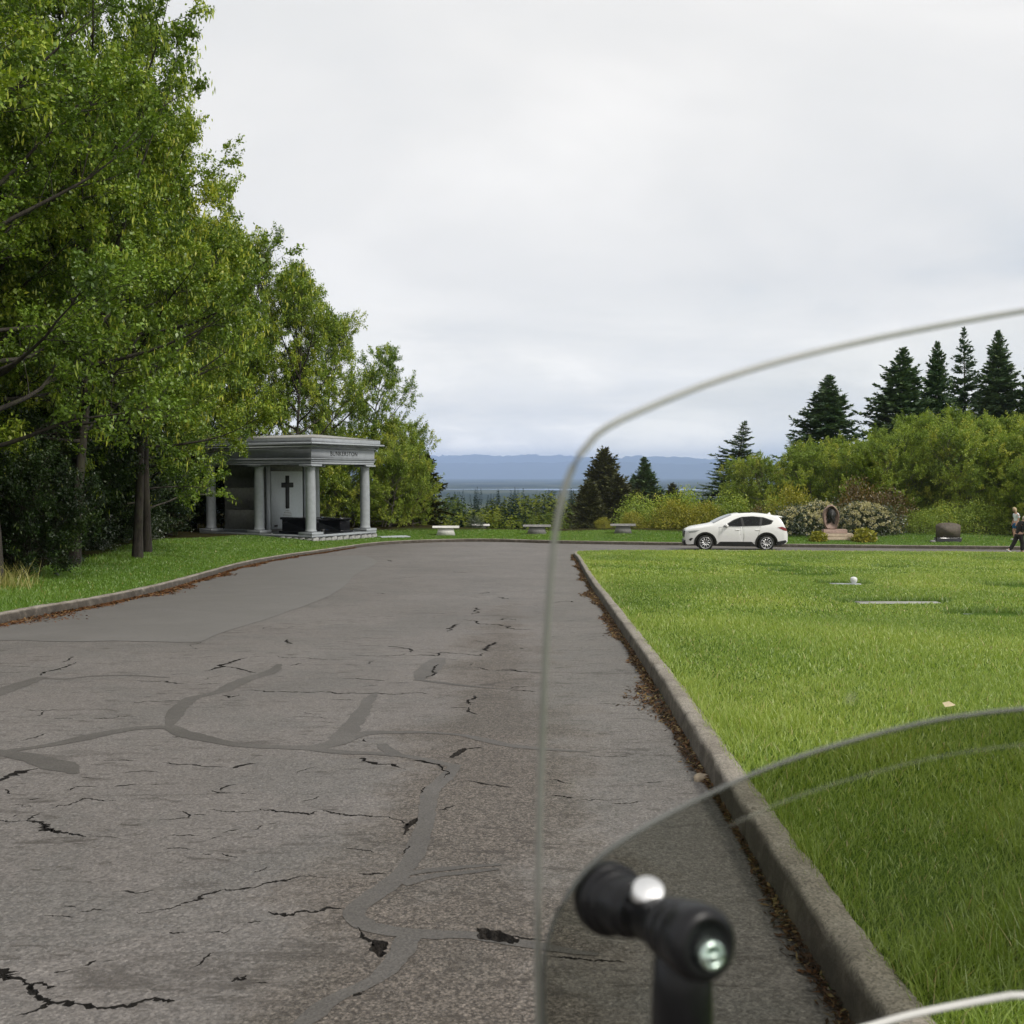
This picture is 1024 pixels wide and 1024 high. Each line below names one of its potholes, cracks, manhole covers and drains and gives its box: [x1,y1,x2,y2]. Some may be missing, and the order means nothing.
crack [124,867,345,933]
crack [359,733,507,810]
pothole [359,929,389,957]
crack [553,779,640,804]
crack [0,960,175,1016]
pothole [476,928,543,944]
crack [26,592,541,740]
crack [0,760,381,857]
crack [231,975,268,983]
